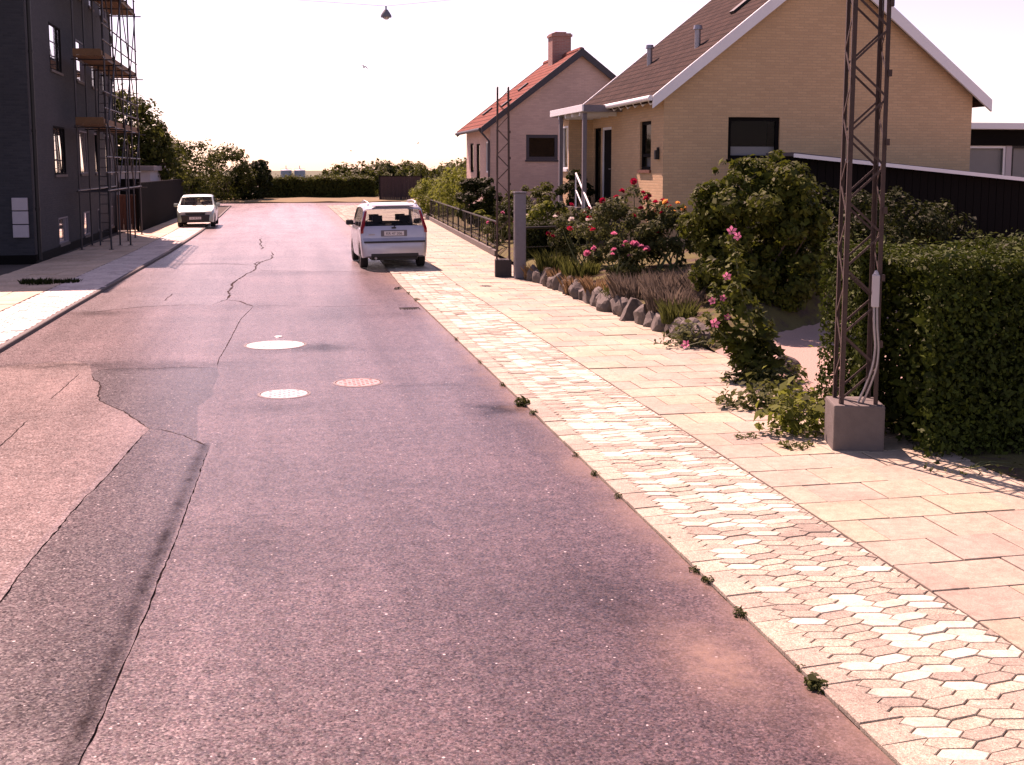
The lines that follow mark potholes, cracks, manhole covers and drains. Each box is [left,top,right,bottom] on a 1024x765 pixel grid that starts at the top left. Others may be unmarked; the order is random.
crack [0,238,379,765]
manhole cover [333,378,383,387]
manhole cover [257,389,311,399]
manhole cover [244,340,307,350]
